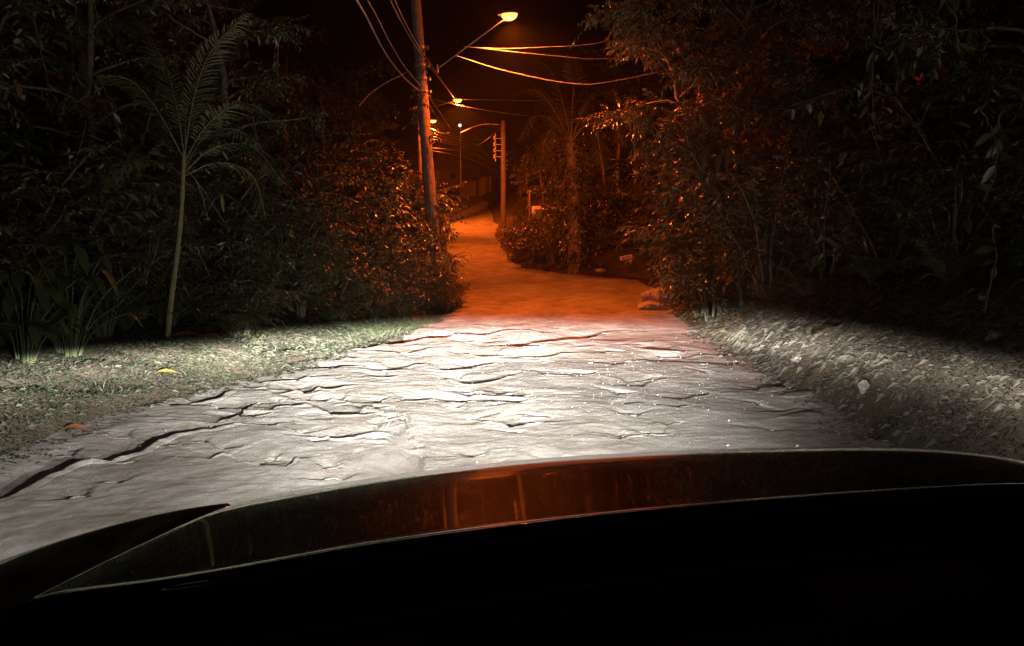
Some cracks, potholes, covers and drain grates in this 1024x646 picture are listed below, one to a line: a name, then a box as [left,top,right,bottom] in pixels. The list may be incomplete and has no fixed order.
crack [0,322,752,502]
crack [757,380,805,431]
